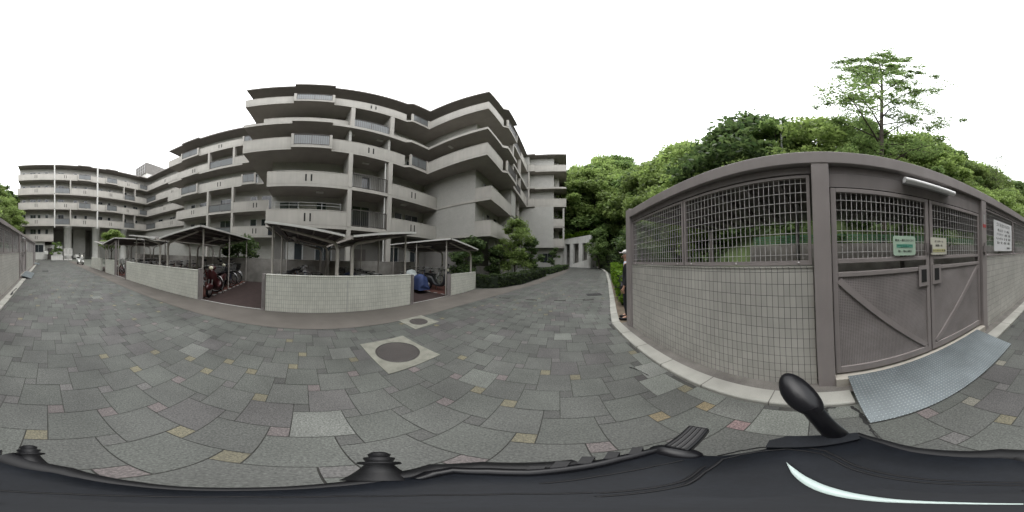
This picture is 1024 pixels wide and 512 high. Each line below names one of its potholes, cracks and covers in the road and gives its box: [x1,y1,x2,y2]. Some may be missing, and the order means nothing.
manhole cover [360,336,440,374]
manhole cover [398,315,439,329]
